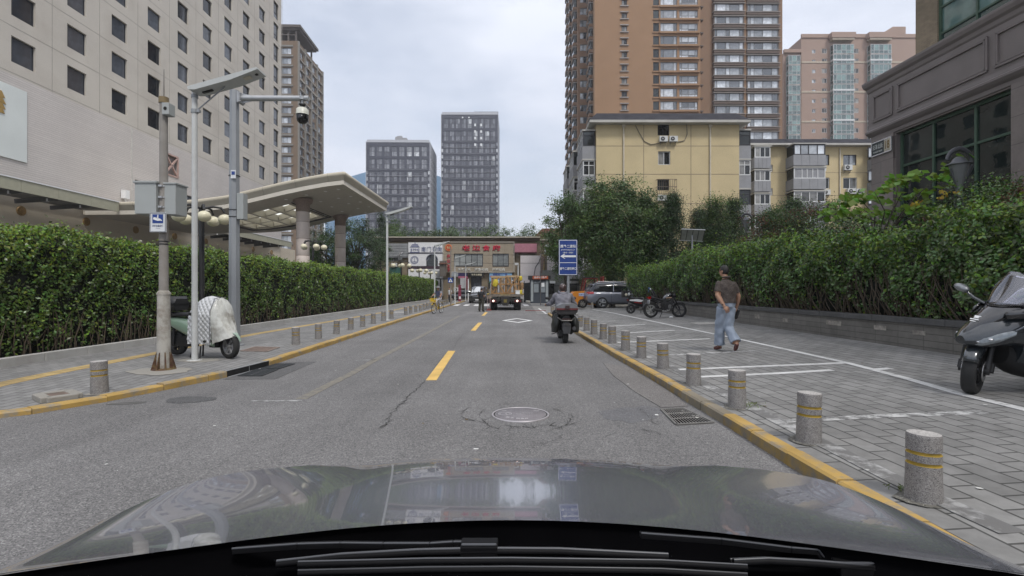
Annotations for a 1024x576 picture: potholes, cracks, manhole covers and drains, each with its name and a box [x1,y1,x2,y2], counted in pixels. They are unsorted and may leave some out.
drain grate [660,407,715,425]
crack [377,333,466,430]
manhole cover [492,407,549,422]
crack [440,403,576,448]
